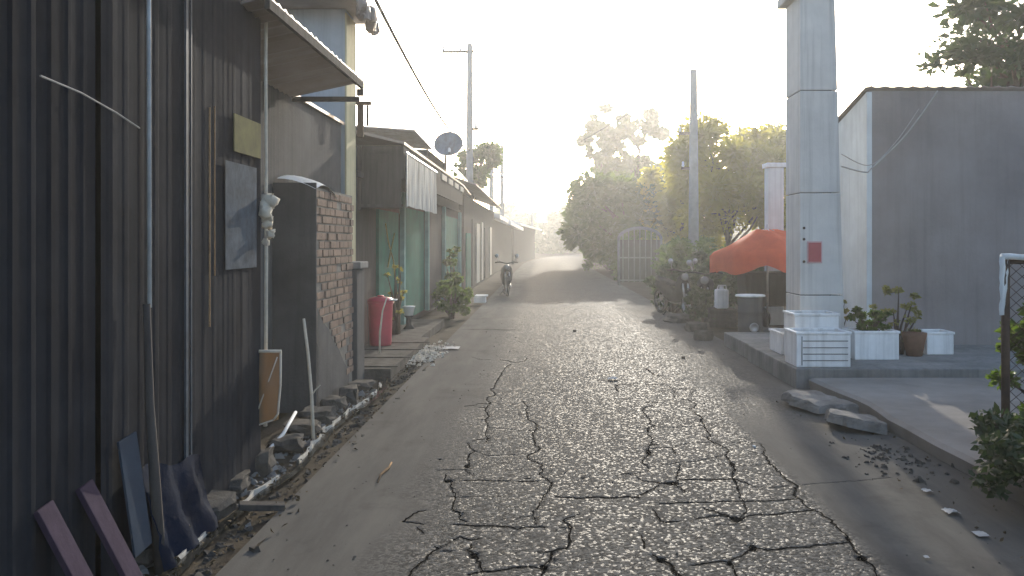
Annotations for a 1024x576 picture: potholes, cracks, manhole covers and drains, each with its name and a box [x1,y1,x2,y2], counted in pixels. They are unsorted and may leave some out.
crack [401,345,890,576]
